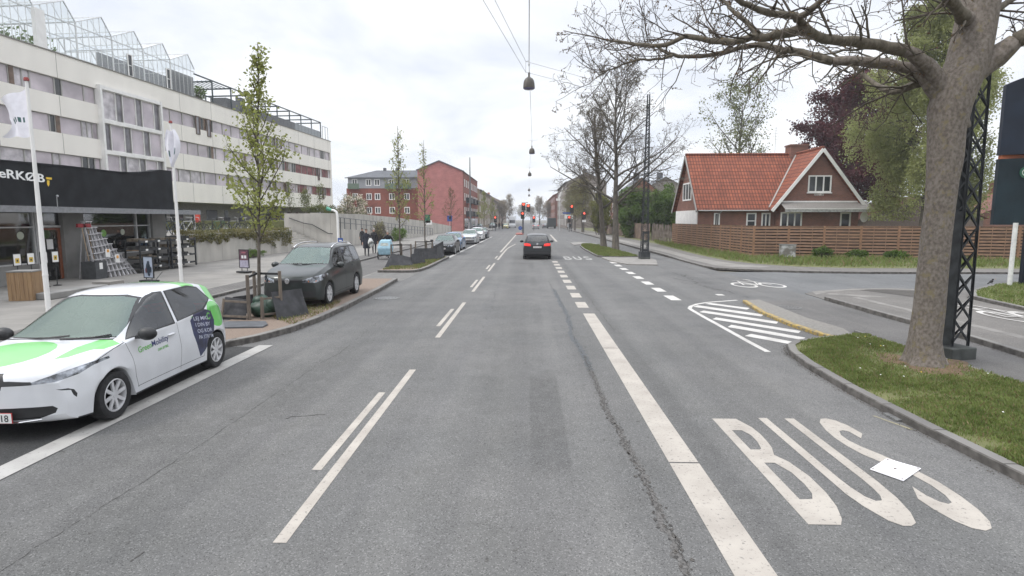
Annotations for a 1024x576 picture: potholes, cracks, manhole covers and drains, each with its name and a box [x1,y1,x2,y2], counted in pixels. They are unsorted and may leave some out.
crack [549,273,749,576]
